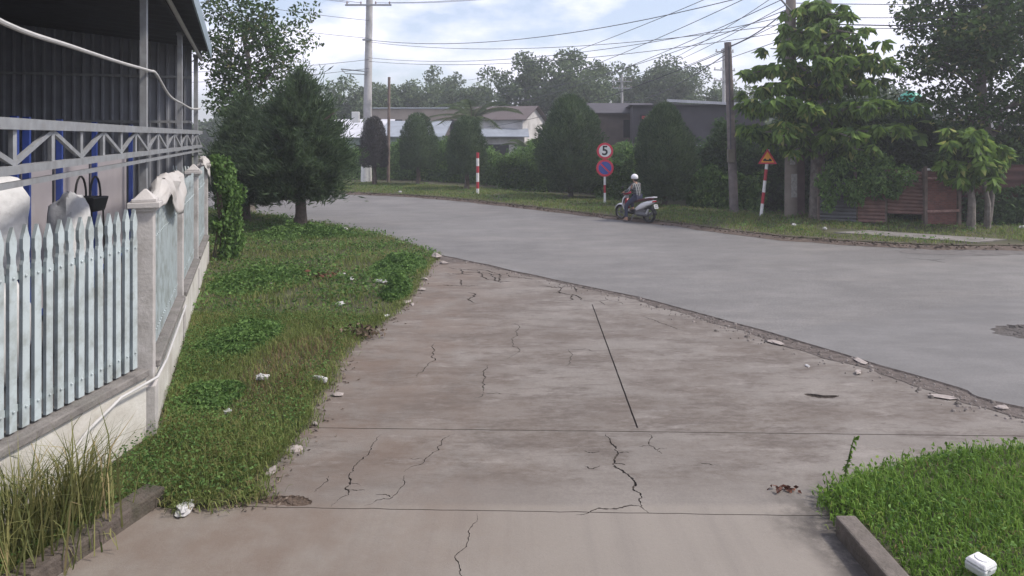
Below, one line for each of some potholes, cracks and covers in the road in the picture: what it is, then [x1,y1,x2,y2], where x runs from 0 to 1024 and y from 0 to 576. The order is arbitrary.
crack [580,435,667,515]
pothole [990,324,1024,339]
pothole [254,495,312,506]
crack [314,434,454,505]
crack [454,516,478,576]
crack [447,267,582,303]
